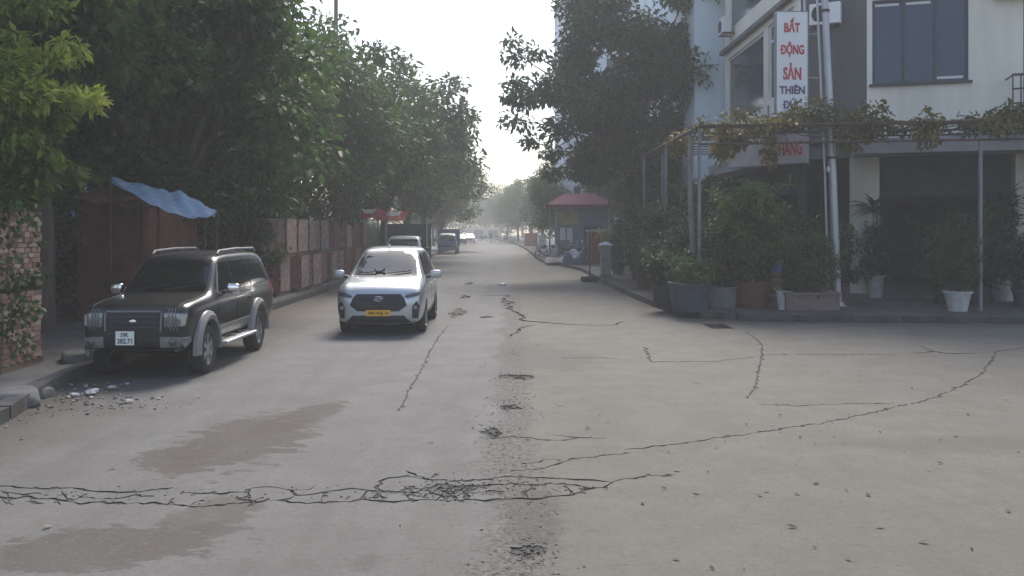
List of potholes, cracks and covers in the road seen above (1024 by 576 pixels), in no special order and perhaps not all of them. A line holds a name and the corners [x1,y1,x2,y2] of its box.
pothole [447,308,467,318]
crack [0,333,1023,507]
pothole [480,427,503,439]
pothole [509,545,546,561]
